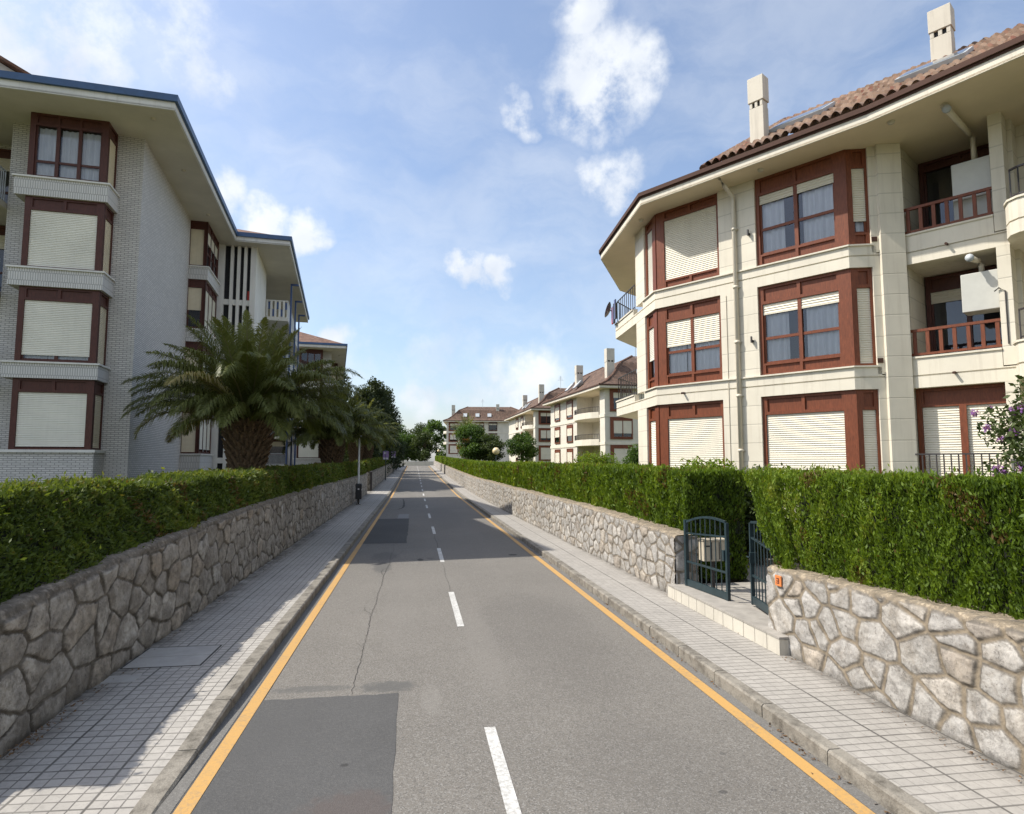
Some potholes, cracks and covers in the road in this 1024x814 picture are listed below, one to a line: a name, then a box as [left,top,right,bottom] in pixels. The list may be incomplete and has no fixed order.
crack [351,546,394,695]
manhole cover [120,645,222,669]
